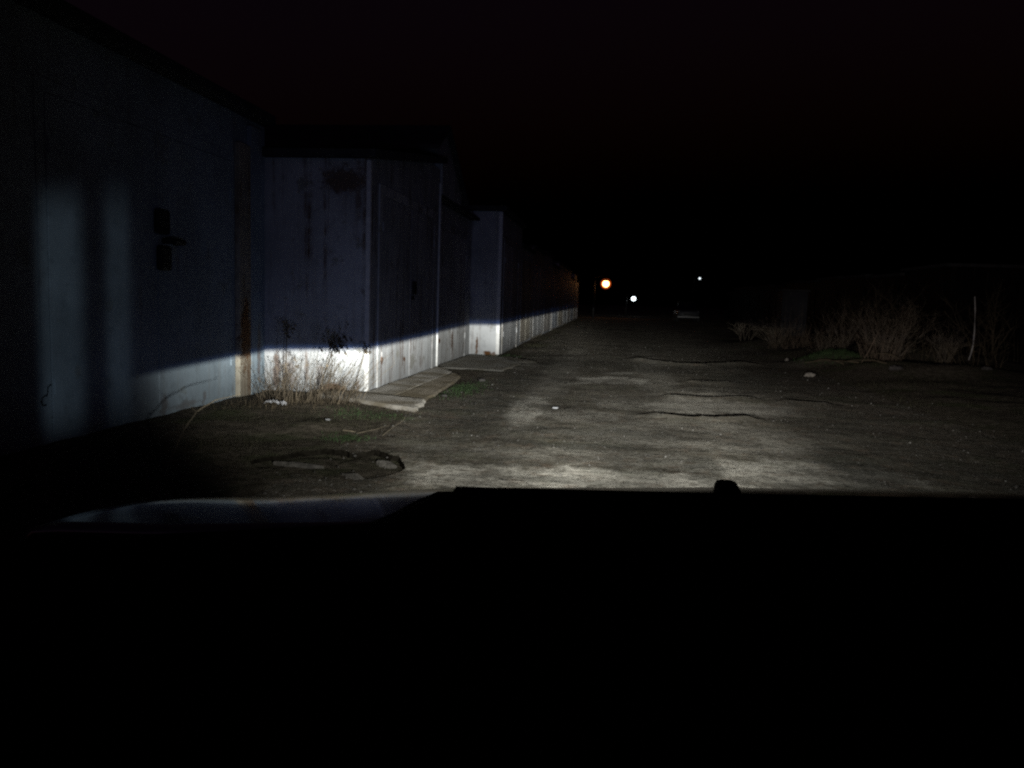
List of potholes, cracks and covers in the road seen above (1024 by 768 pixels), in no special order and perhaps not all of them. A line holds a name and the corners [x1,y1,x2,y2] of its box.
pothole [250,448,405,481]
